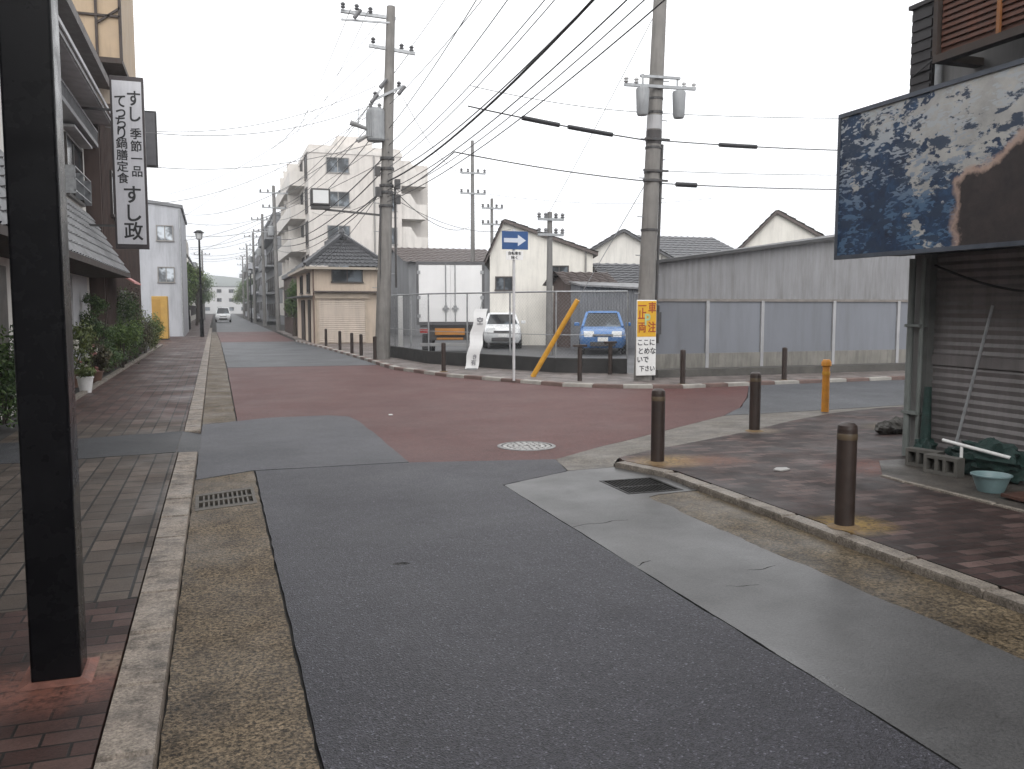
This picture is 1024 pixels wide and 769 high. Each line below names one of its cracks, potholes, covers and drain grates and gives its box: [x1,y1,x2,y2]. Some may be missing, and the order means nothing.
drain grate [600,477,683,494]
drain grate [195,486,257,511]
manhole cover [497,441,556,451]
